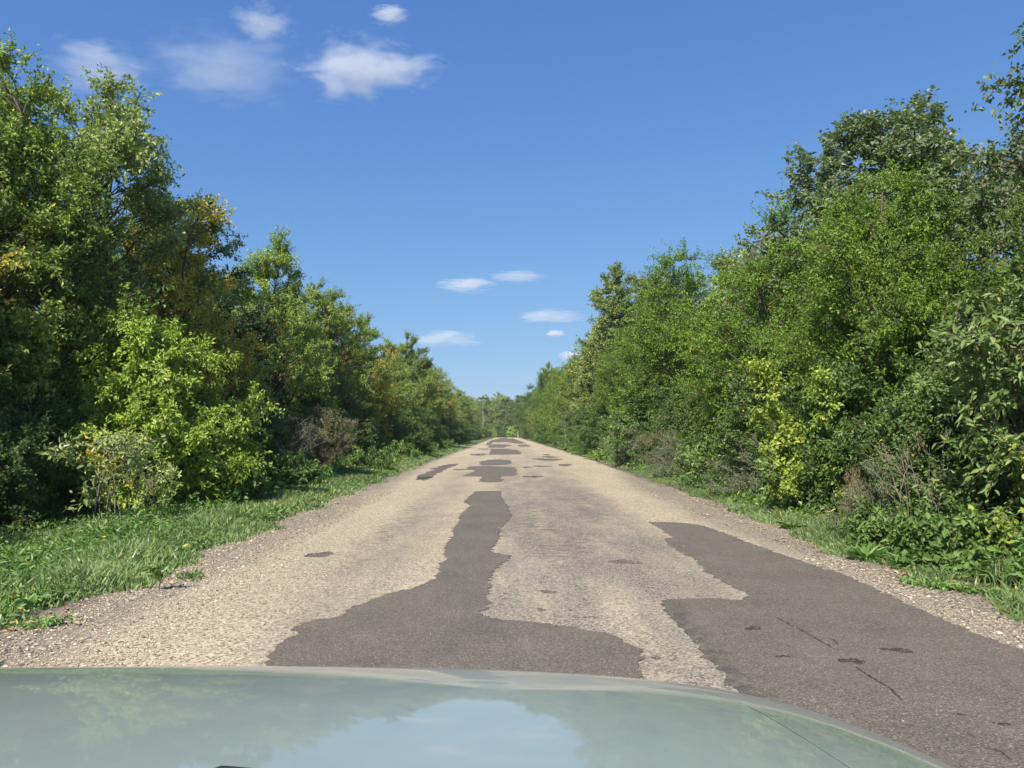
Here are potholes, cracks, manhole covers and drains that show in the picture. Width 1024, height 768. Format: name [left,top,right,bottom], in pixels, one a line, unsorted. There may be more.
crack [775,616,903,701]
